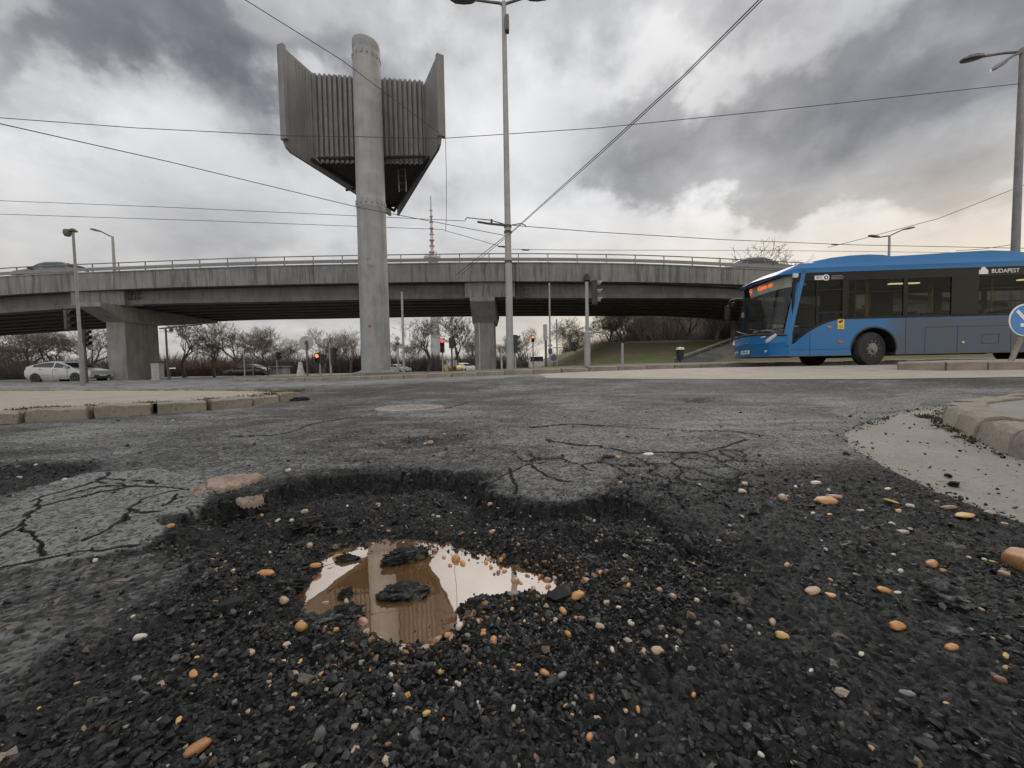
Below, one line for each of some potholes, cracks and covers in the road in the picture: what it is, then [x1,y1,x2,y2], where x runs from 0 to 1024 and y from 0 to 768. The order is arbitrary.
pothole [106,470,759,743]
manhole cover [375,404,444,414]
crack [488,424,771,510]
crack [228,417,354,437]
crack [0,472,190,569]
